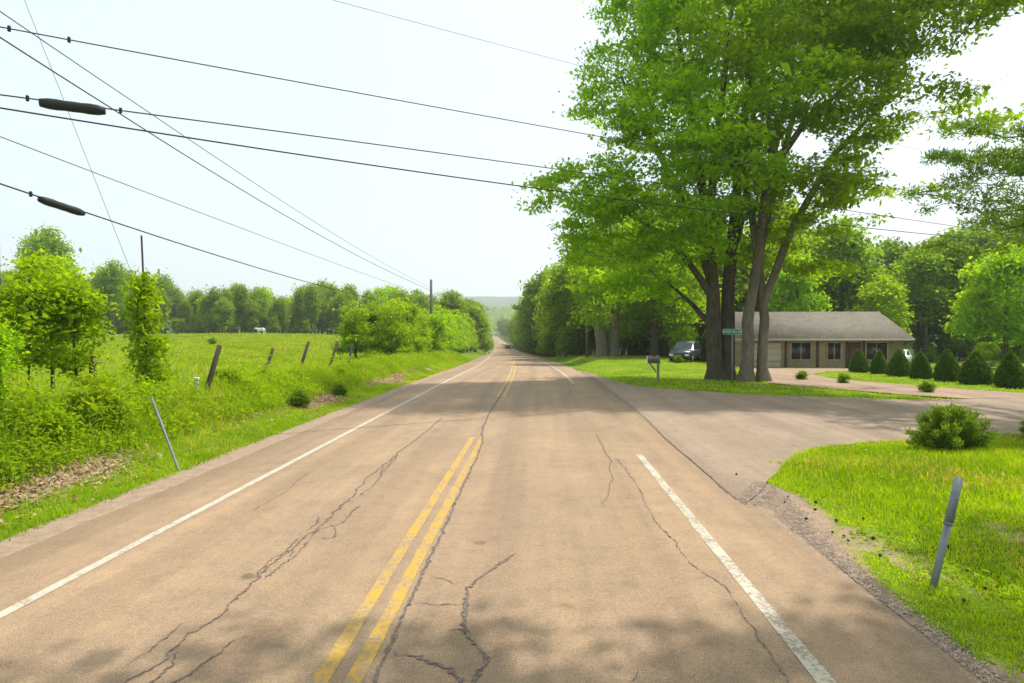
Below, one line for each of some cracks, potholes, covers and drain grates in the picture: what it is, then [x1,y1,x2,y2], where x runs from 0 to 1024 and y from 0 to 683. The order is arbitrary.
crack [597,435,789,683]
crack [394,651,464,683]
crack [124,417,442,683]
